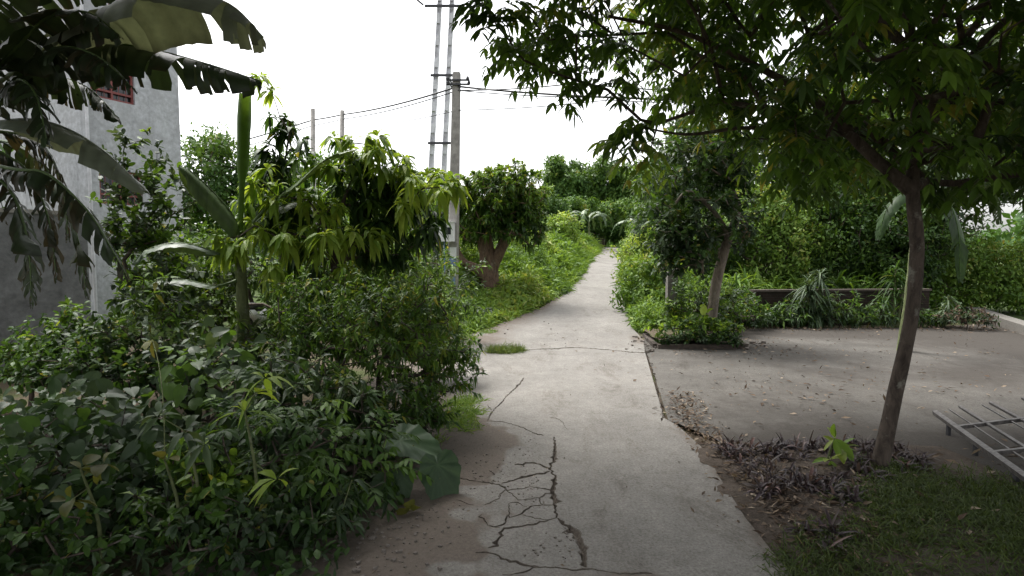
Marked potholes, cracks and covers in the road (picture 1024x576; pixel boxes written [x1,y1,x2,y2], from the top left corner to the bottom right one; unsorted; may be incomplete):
crack [458,378,652,575]
